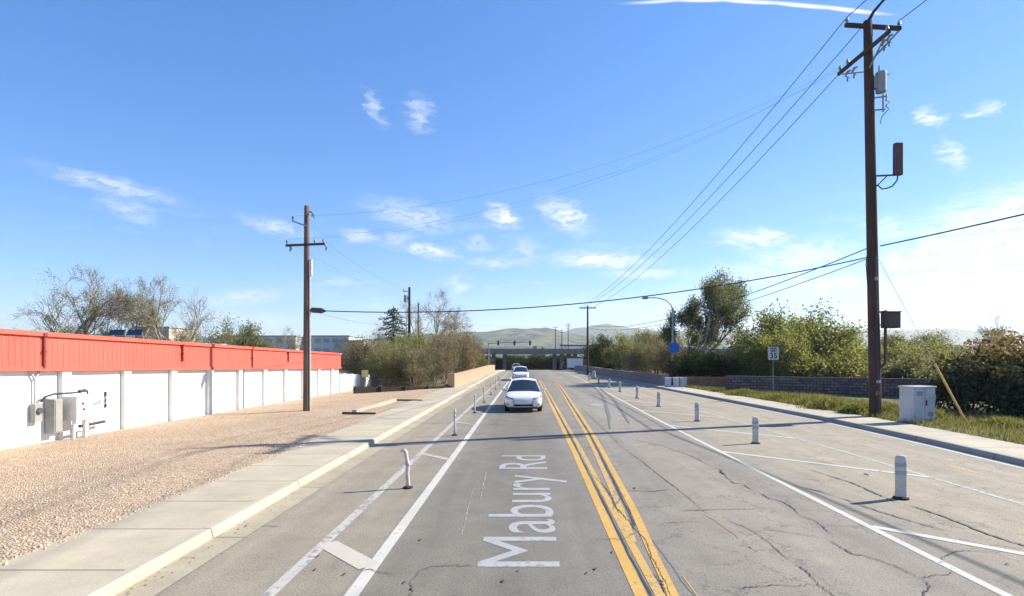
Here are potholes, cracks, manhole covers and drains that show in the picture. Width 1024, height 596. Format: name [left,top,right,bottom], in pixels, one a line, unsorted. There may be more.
crack [364,564,477,595]
crack [597,440,986,596]
